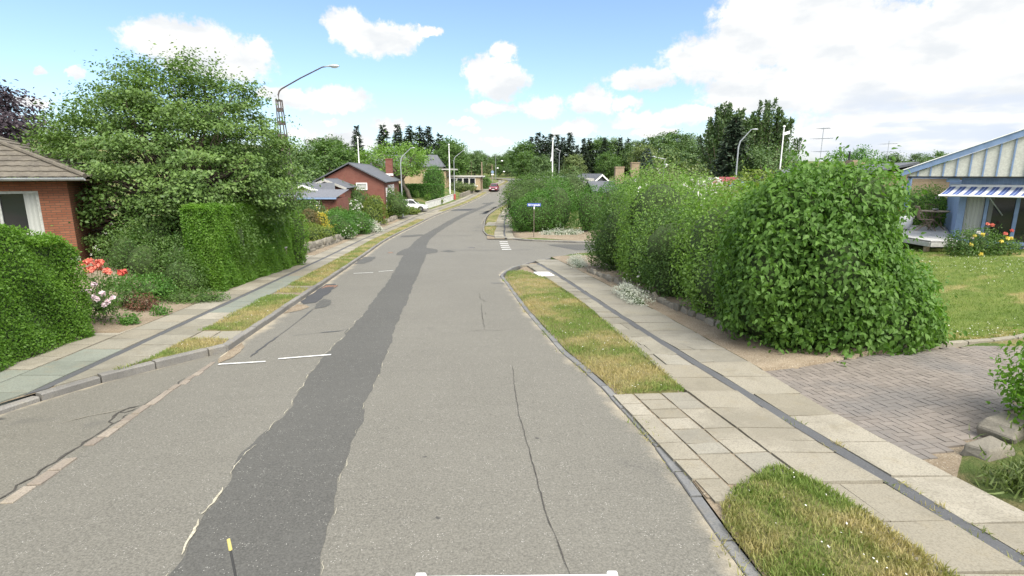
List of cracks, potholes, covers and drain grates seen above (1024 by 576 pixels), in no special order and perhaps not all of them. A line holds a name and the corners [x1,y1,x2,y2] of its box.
crack [512,367,570,574]
crack [1,379,183,498]
